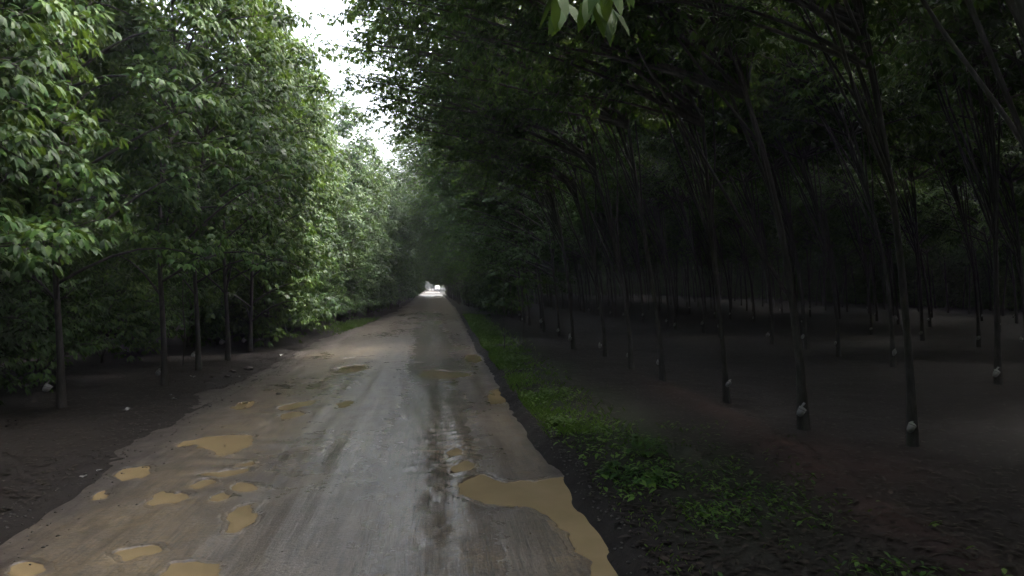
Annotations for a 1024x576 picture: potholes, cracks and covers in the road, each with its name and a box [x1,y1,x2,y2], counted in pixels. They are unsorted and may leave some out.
pothole [270,399,322,411]
pothole [105,542,170,563]
pothole [149,557,232,576]
pothole [0,557,55,576]
pothole [225,400,265,411]
pothole [79,488,115,504]
pothole [201,489,242,504]
pothole [480,387,508,405]
pothole [446,459,479,475]
